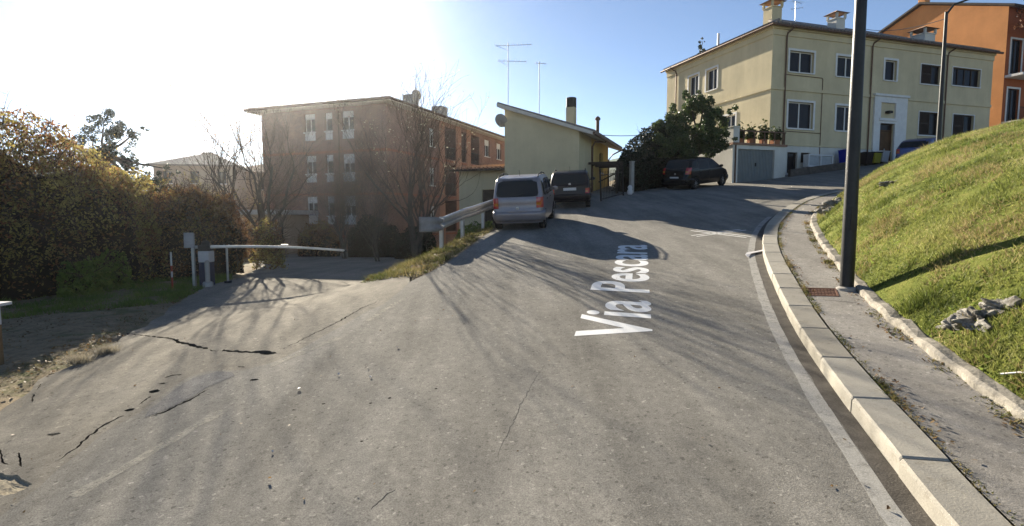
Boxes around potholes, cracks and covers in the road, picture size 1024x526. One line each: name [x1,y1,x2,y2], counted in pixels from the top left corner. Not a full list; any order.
crack [126,333,276,367]
crack [149,374,206,418]
crack [0,449,22,467]
